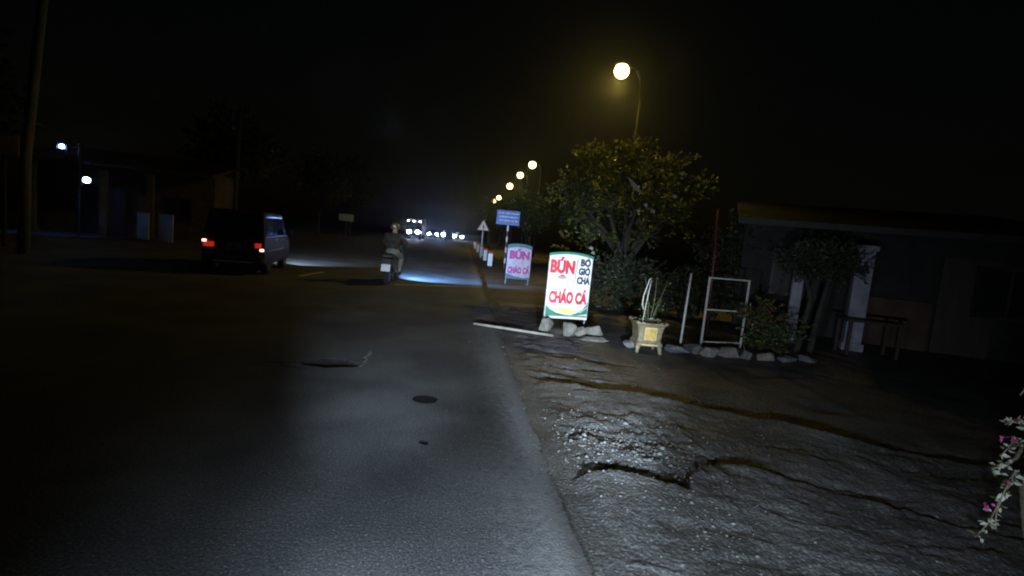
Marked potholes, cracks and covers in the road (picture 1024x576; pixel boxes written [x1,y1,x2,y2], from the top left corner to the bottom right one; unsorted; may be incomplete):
pothole [300,358,361,368]
